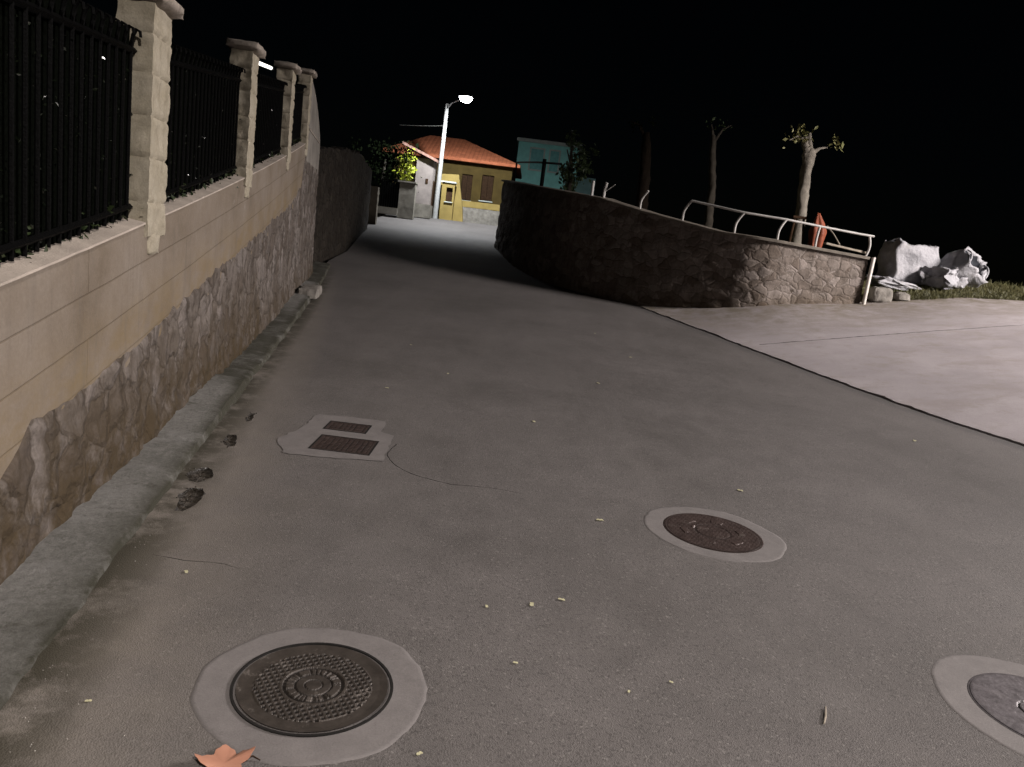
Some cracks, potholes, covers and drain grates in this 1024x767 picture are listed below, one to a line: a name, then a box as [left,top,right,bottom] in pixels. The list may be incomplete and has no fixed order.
crack [387,445,517,493]
pothole [174,486,206,511]
manhole cover [190,628,428,766]
pothole [220,435,237,447]
manhole cover [931,655,1024,757]
pothole [185,467,214,482]
manhole cover [644,507,787,562]
